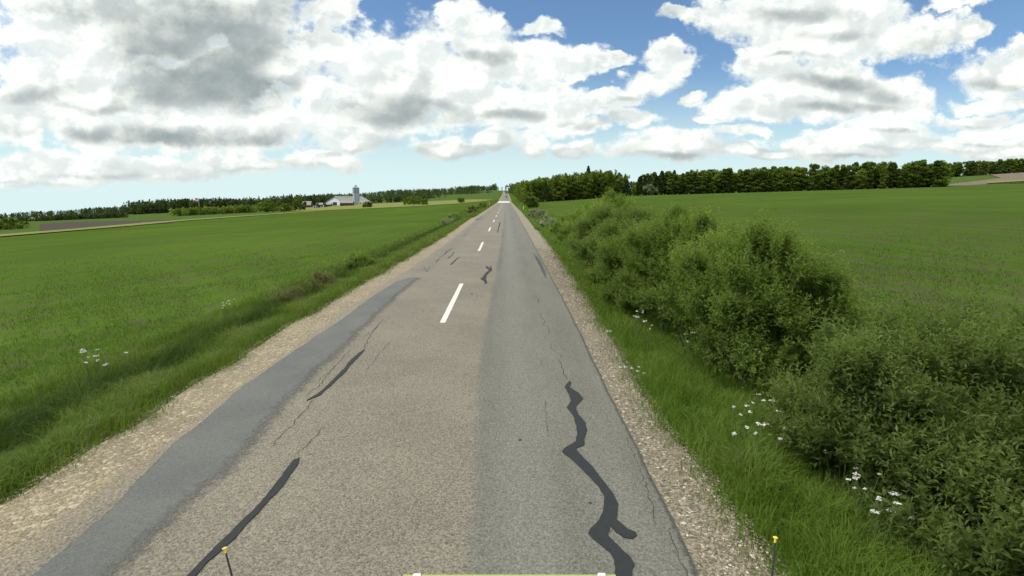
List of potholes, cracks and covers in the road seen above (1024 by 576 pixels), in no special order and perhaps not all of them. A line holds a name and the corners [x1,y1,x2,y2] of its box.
crack [626,437,688,576]
crack [271,319,385,458]
